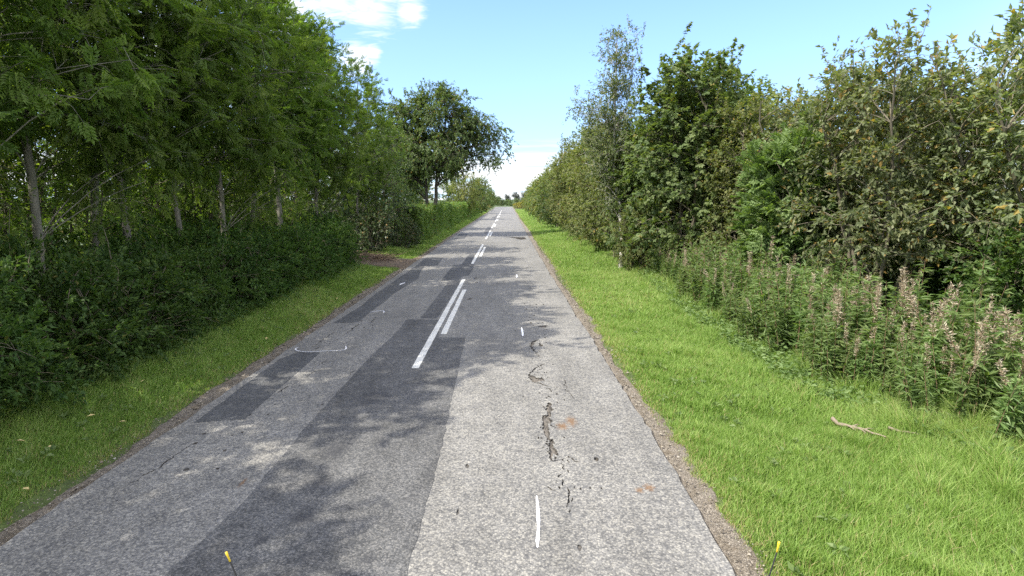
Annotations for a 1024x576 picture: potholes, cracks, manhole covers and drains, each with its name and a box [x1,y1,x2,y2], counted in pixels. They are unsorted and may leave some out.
crack [116,442,198,501]
crack [547,456,602,513]
